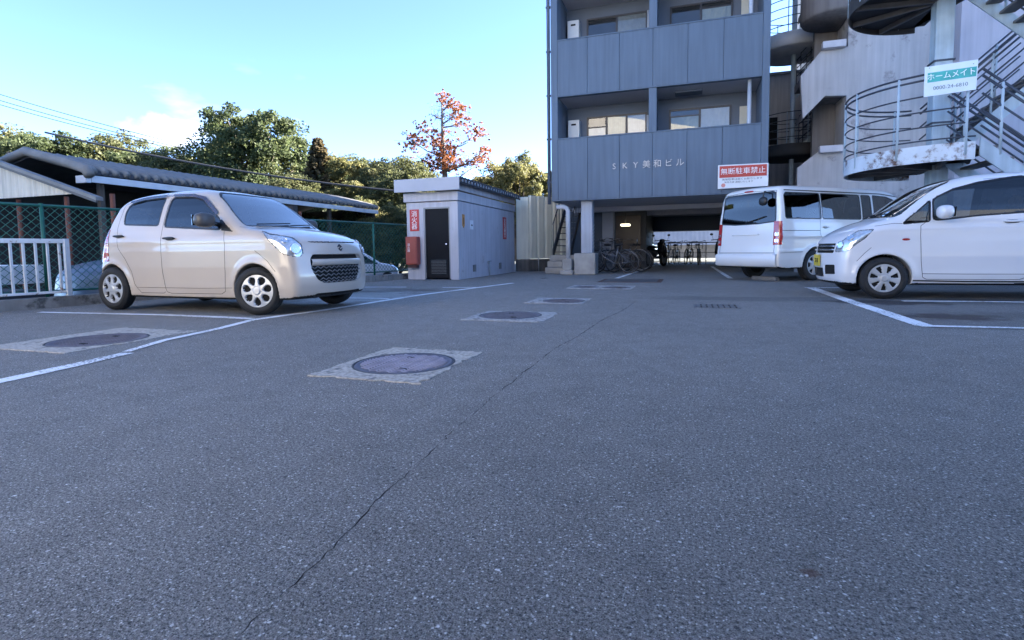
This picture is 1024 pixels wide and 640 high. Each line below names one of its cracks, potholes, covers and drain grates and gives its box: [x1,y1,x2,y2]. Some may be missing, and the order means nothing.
crack [236,303,633,640]
manhole cover [307,347,483,384]
manhole cover [0,327,196,354]
manhole cover [461,311,559,322]
